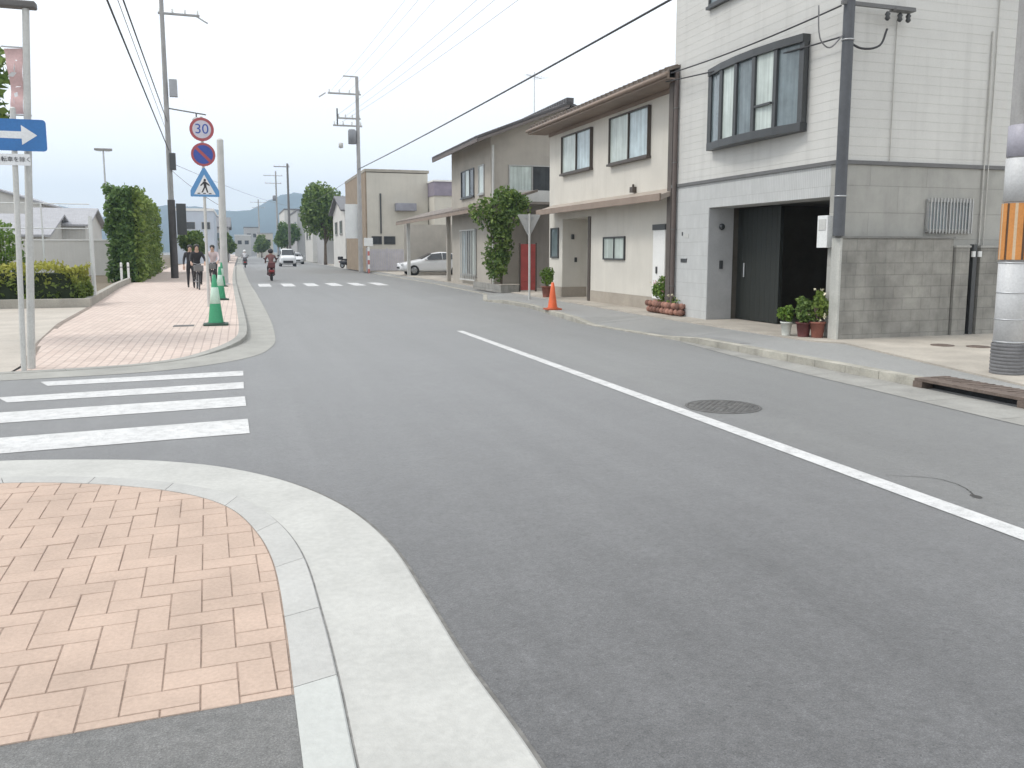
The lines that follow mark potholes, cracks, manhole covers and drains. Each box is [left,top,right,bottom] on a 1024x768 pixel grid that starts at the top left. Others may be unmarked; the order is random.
manhole cover [685,400,762,414]
